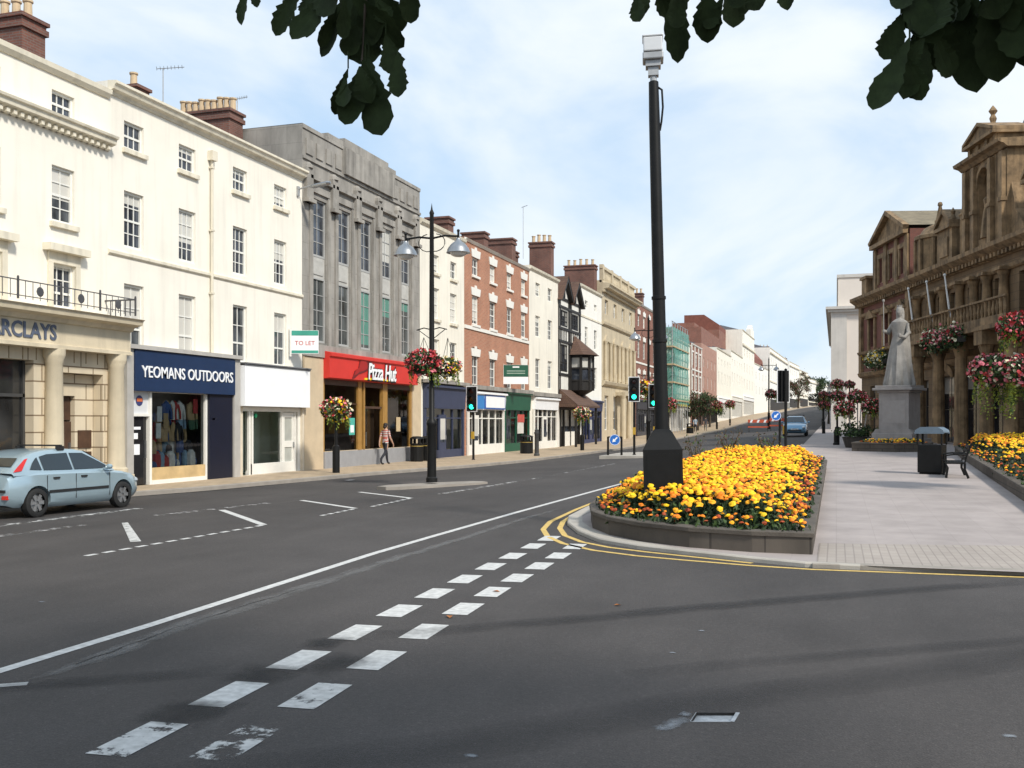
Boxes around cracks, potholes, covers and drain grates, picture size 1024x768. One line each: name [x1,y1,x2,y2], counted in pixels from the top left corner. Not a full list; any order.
manhole cover [690,712,739,722]
